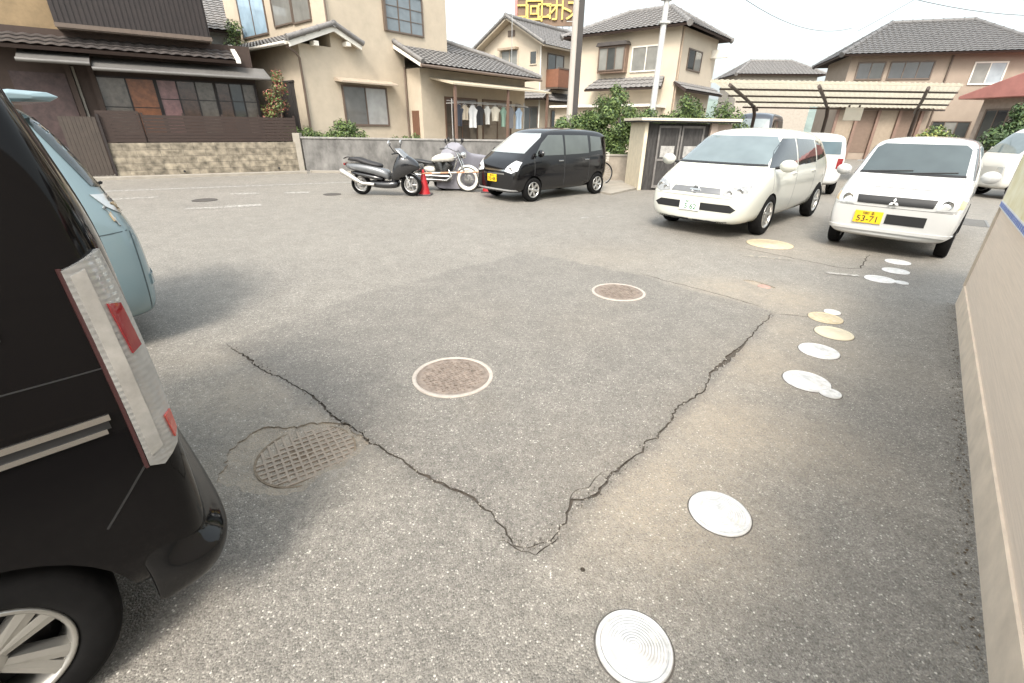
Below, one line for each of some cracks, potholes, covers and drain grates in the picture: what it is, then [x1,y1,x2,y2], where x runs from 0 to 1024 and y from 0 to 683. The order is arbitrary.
manhole cover [746,239,794,250]
manhole cover [592,283,646,301]
crack [225,313,772,555]
